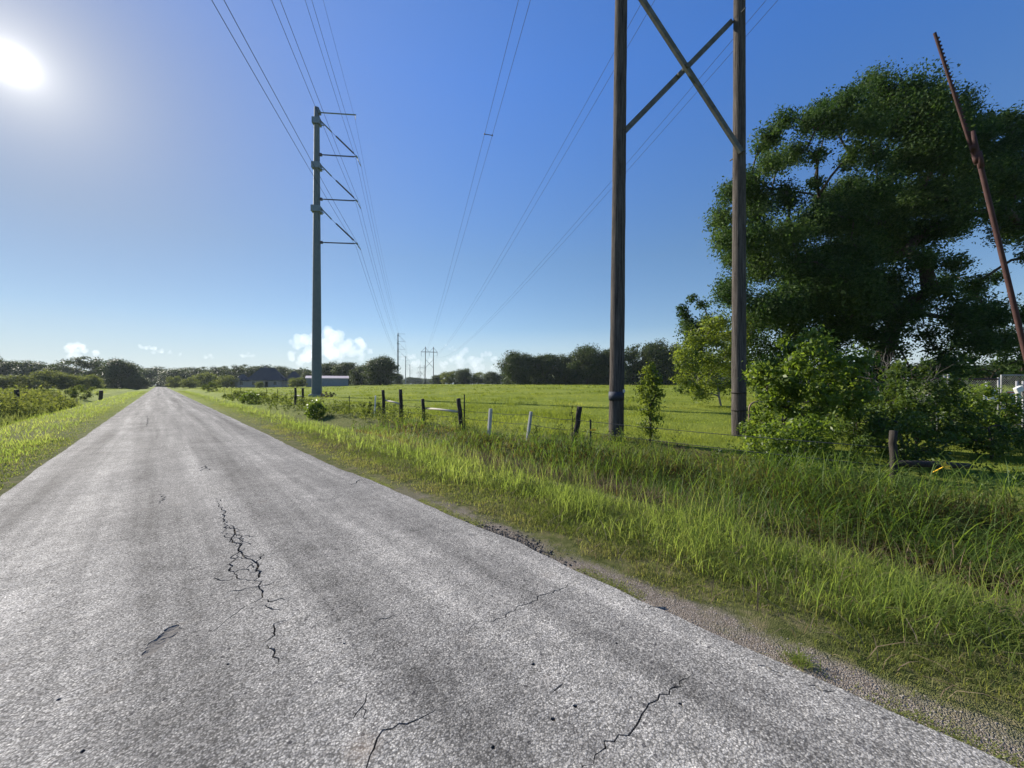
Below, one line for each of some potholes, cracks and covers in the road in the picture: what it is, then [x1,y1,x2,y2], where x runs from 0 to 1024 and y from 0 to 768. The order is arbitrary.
crack [353,694,434,768]
pothole [142,625,182,657]
crack [581,672,693,768]
crack [459,581,577,637]
